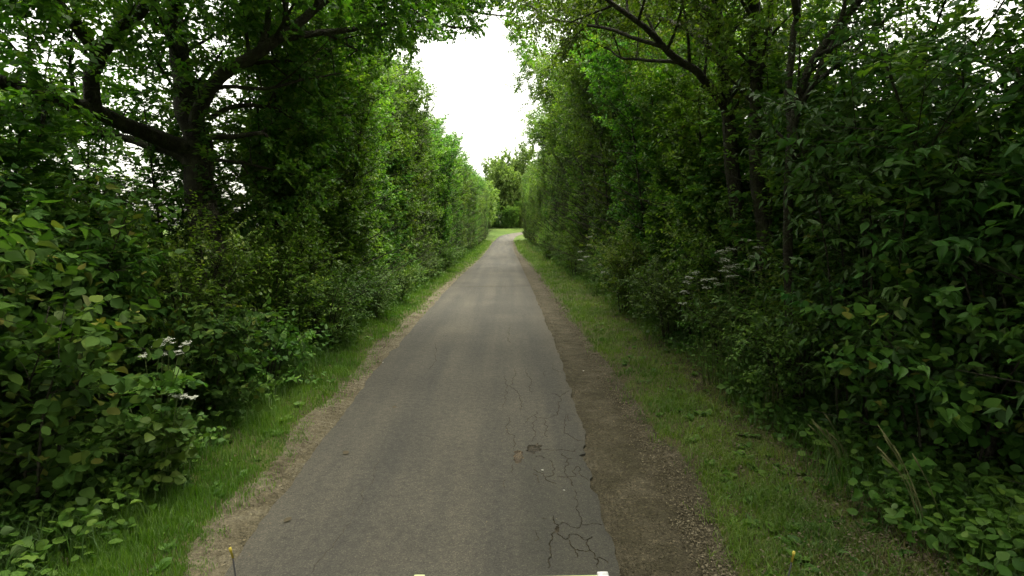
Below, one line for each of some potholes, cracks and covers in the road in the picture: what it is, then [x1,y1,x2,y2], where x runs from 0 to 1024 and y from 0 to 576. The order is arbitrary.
pothole [525,443,542,454]
pothole [513,450,524,464]
crack [502,367,608,568]
